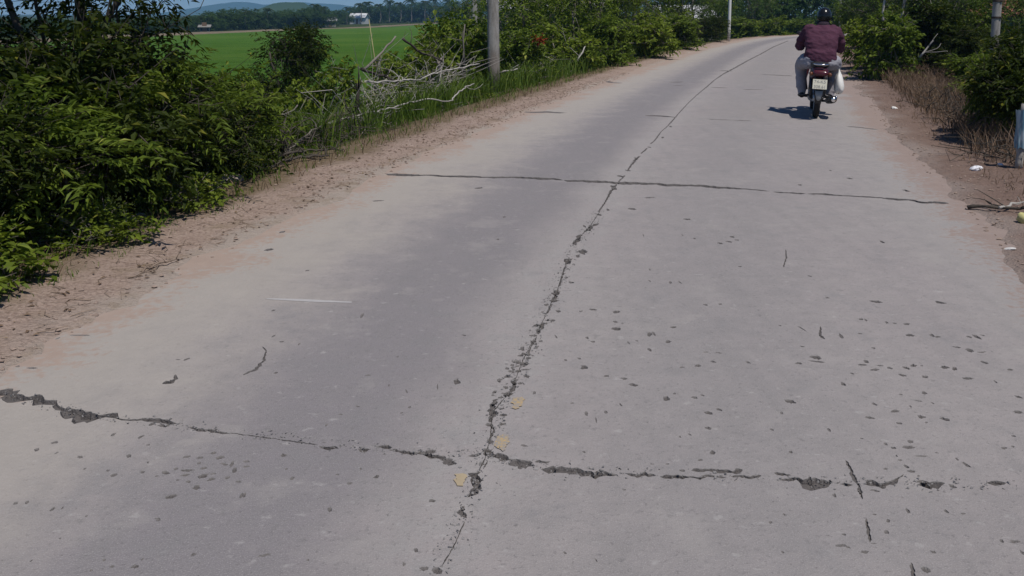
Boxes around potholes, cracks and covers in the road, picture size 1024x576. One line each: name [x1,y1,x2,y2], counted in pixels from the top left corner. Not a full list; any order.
crack [243,347,267,375]
crack [443,41,788,564]
